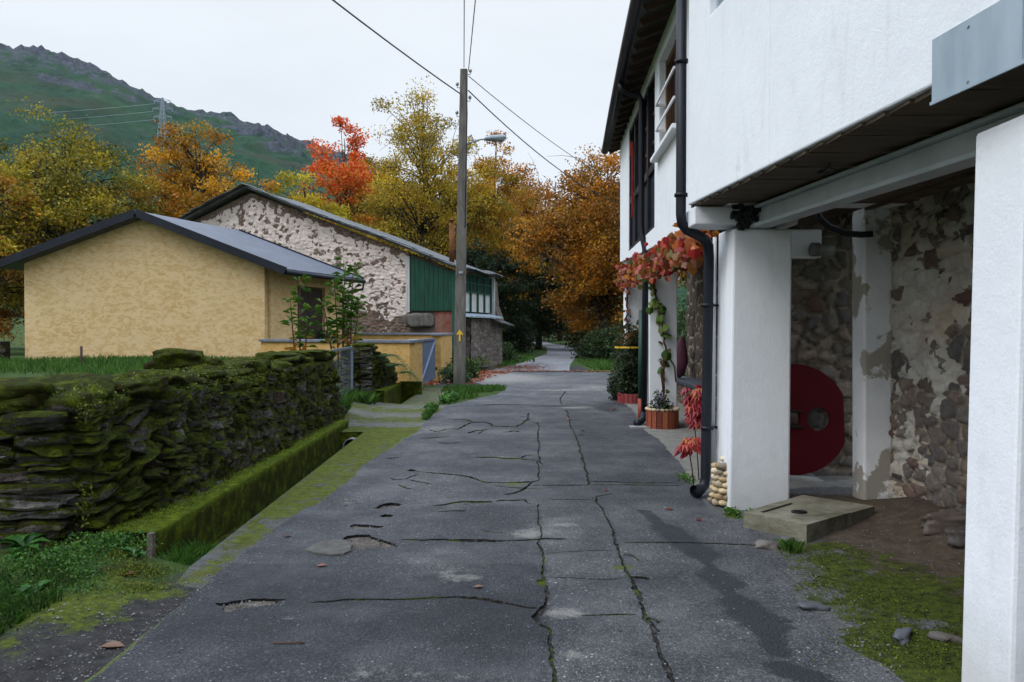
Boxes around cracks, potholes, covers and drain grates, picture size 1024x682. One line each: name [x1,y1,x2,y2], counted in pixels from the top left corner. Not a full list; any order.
pothole [343,535,397,549]
crack [309,391,755,682]
pothole [216,598,287,612]
